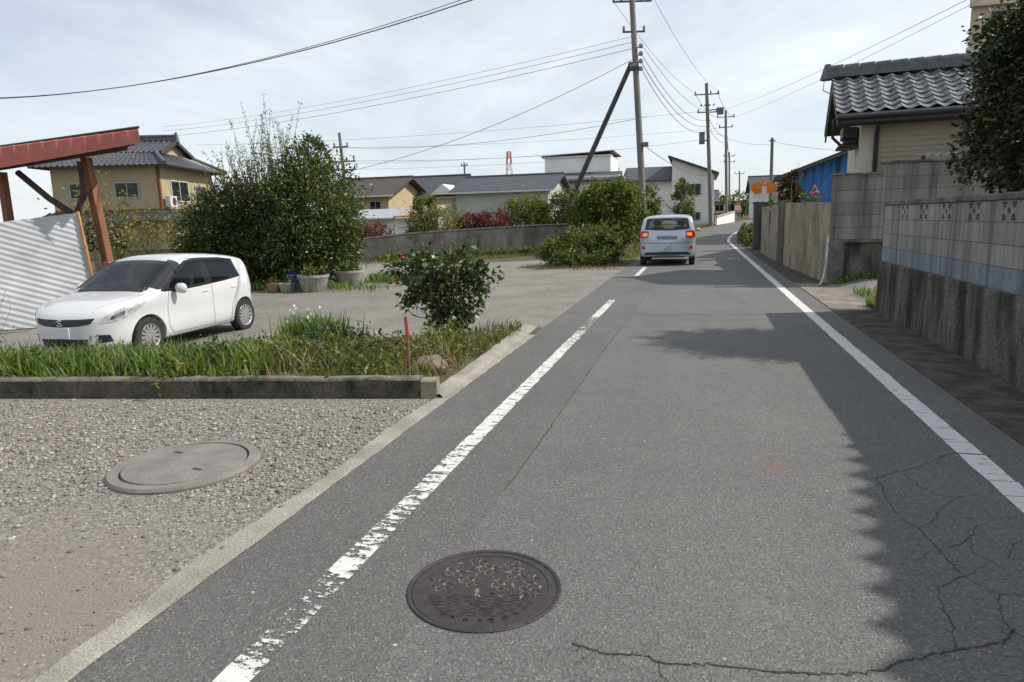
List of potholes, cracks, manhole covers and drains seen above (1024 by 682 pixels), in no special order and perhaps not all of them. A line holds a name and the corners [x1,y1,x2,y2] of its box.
crack [560,453,1024,682]
manhole cover [104,440,261,495]
manhole cover [407,550,561,634]
